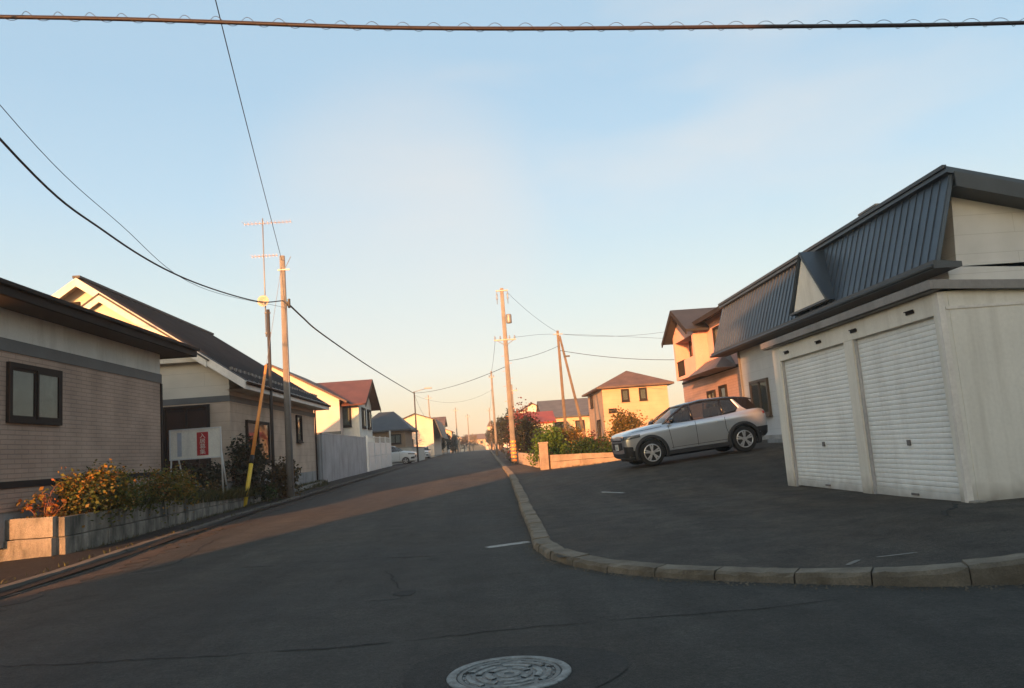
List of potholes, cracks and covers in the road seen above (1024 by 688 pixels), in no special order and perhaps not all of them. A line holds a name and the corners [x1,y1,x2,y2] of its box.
crack [295,556,423,601]
manhole cover [446,656,572,688]
